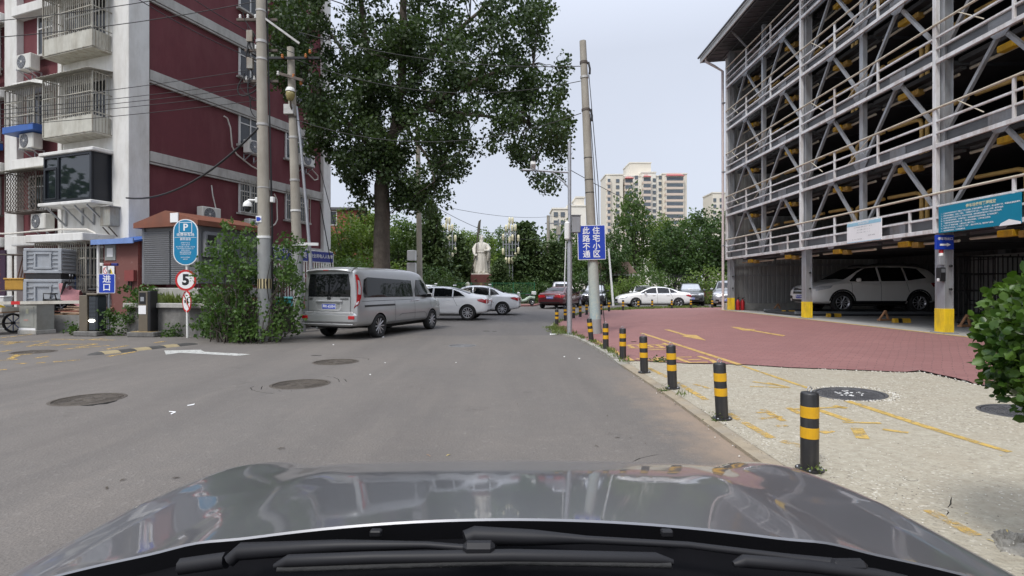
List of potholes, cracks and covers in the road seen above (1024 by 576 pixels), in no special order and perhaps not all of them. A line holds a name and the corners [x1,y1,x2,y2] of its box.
manhole cover [813,387,889,401]
manhole cover [269,379,331,390]
pothole [991,529,1024,558]
manhole cover [976,404,1024,417]
manhole cover [47,393,128,406]
